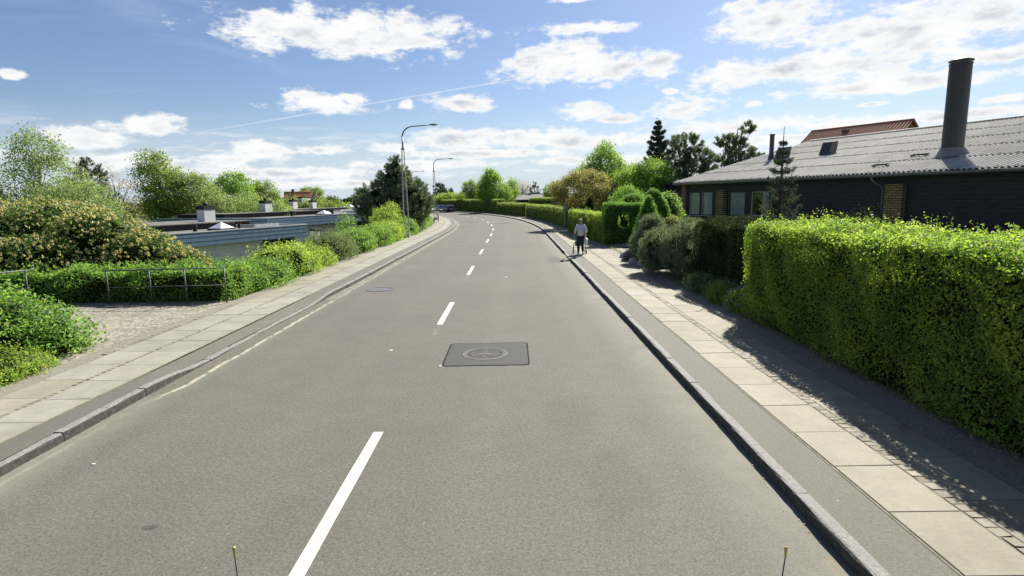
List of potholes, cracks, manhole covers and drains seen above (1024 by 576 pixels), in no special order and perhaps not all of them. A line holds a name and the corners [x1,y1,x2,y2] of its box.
manhole cover [463,348,508,360]
